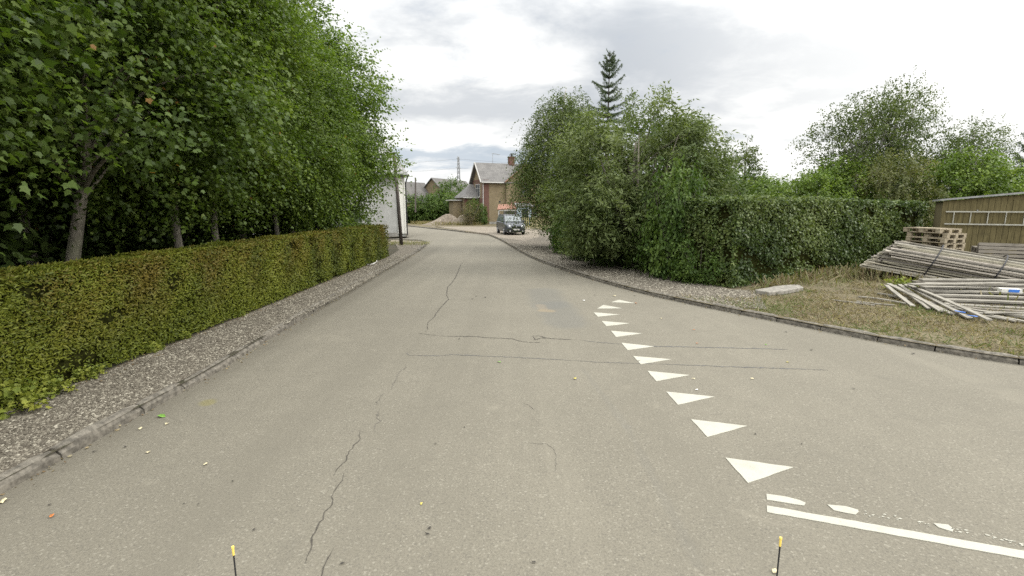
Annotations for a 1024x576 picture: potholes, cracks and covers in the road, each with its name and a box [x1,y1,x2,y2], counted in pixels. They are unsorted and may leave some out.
crack [305,265,821,576]
